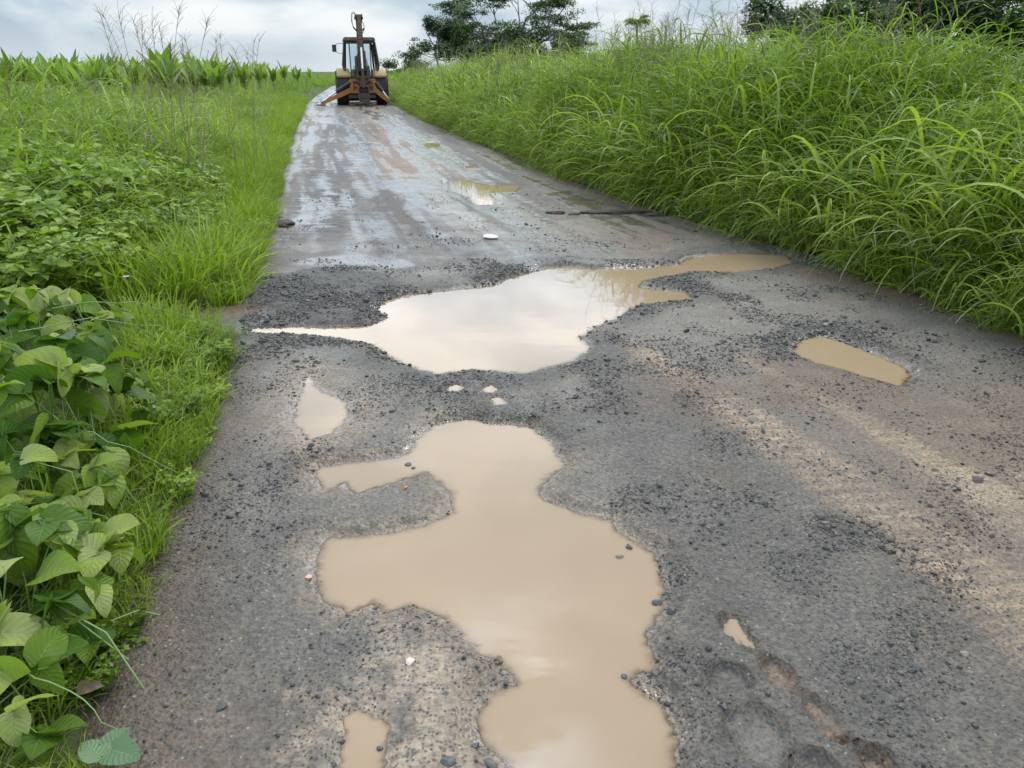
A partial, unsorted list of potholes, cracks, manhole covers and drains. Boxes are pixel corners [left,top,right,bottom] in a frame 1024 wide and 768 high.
pothole [233,248,806,375]
pothole [270,365,371,447]
pothole [439,177,531,205]
pothole [772,327,935,390]
pothole [281,403,723,768]
